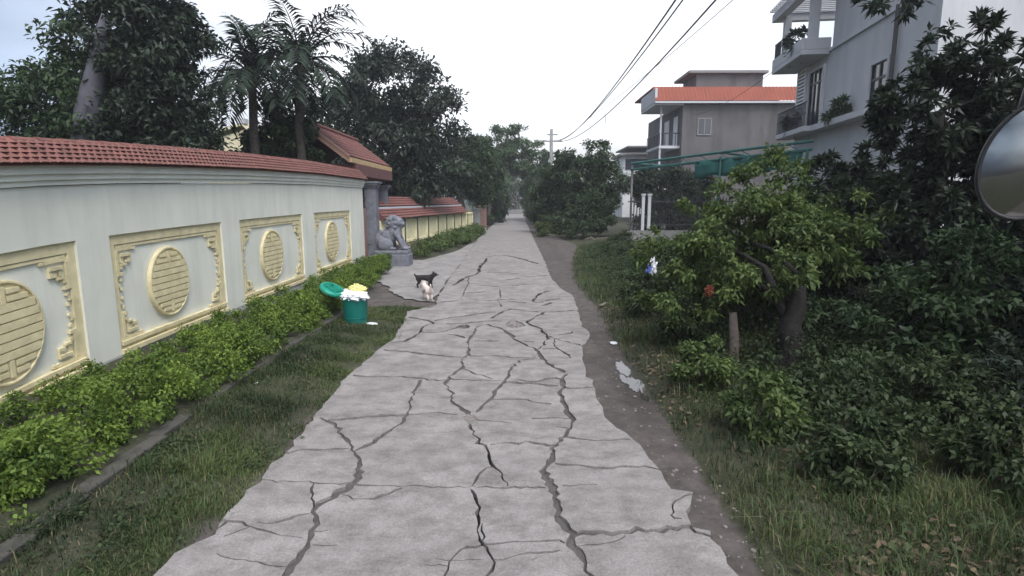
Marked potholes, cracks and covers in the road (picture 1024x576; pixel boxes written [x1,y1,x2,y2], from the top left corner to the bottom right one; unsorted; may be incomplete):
crack [284,381,422,576]
crack [404,292,691,576]
crack [454,259,487,295]
